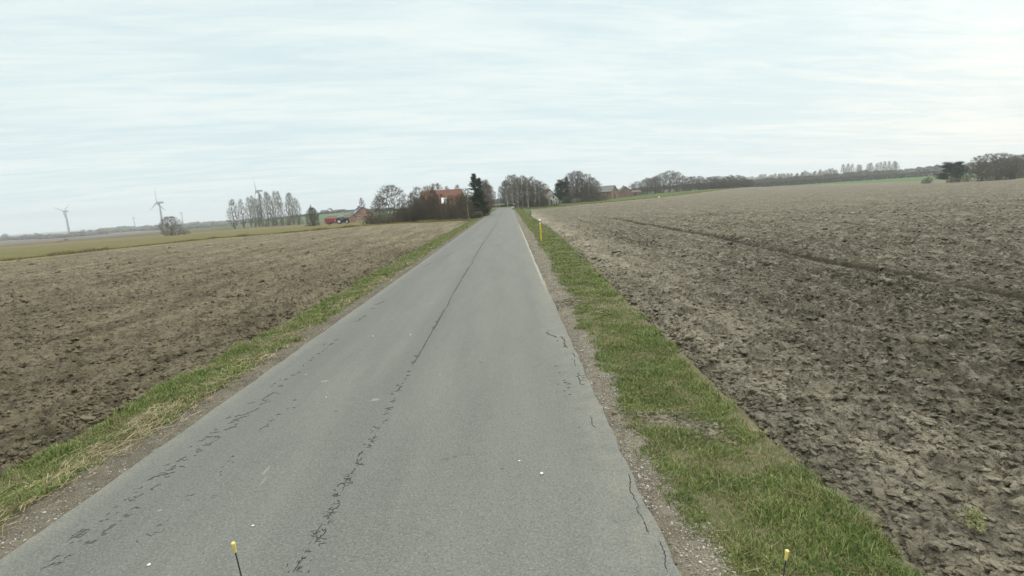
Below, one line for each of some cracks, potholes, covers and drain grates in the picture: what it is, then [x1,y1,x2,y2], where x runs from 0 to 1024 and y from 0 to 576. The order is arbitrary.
crack [629,476,668,572]
crack [546,332,586,395]
crack [42,252,453,569]
crack [287,225,496,573]
